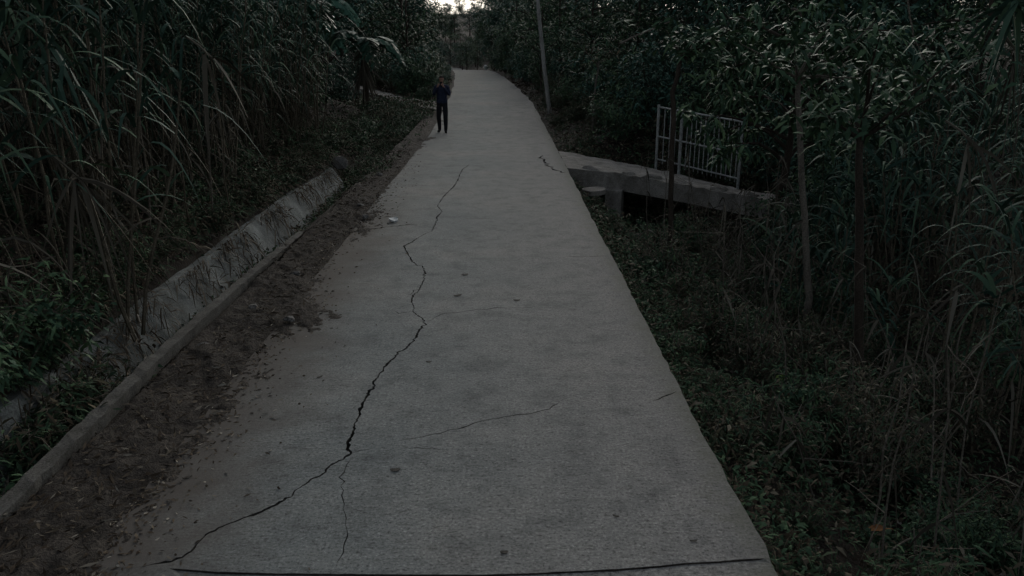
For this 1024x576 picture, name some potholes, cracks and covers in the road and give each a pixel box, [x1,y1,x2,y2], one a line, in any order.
crack [143,165,530,567]
crack [394,402,559,450]
